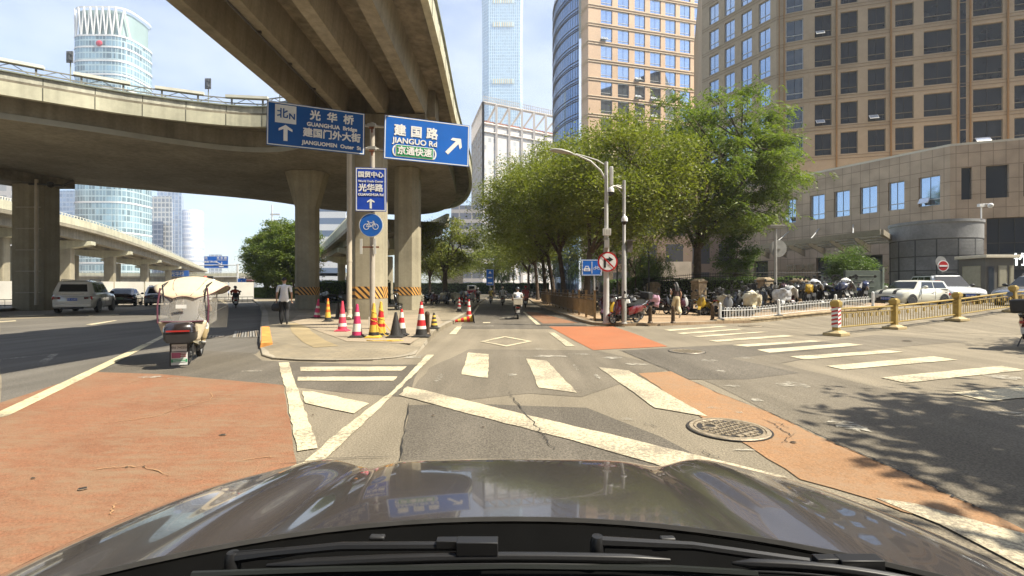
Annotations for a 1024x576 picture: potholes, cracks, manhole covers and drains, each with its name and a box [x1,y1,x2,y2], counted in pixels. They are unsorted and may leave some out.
crack [681,375,986,510]
crack [509,393,555,450]
manhole cover [686,418,774,441]
